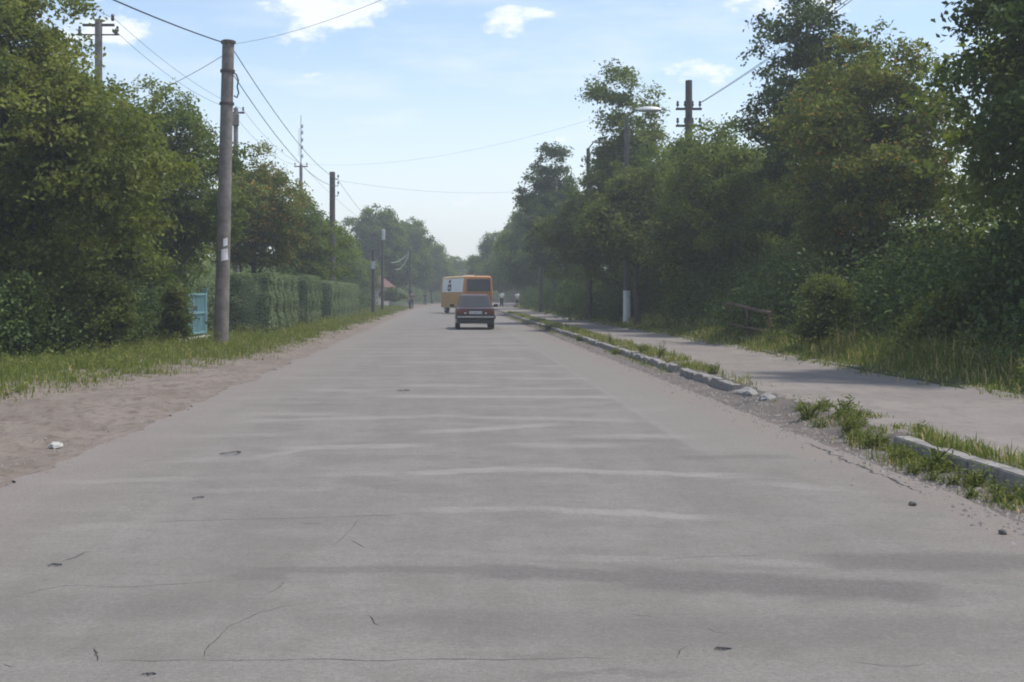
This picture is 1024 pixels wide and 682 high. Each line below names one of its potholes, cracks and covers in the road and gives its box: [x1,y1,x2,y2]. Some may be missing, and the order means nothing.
crack [93,581,614,662]
crack [31,580,220,593]
crack [154,512,422,548]
crack [805,442,918,491]
